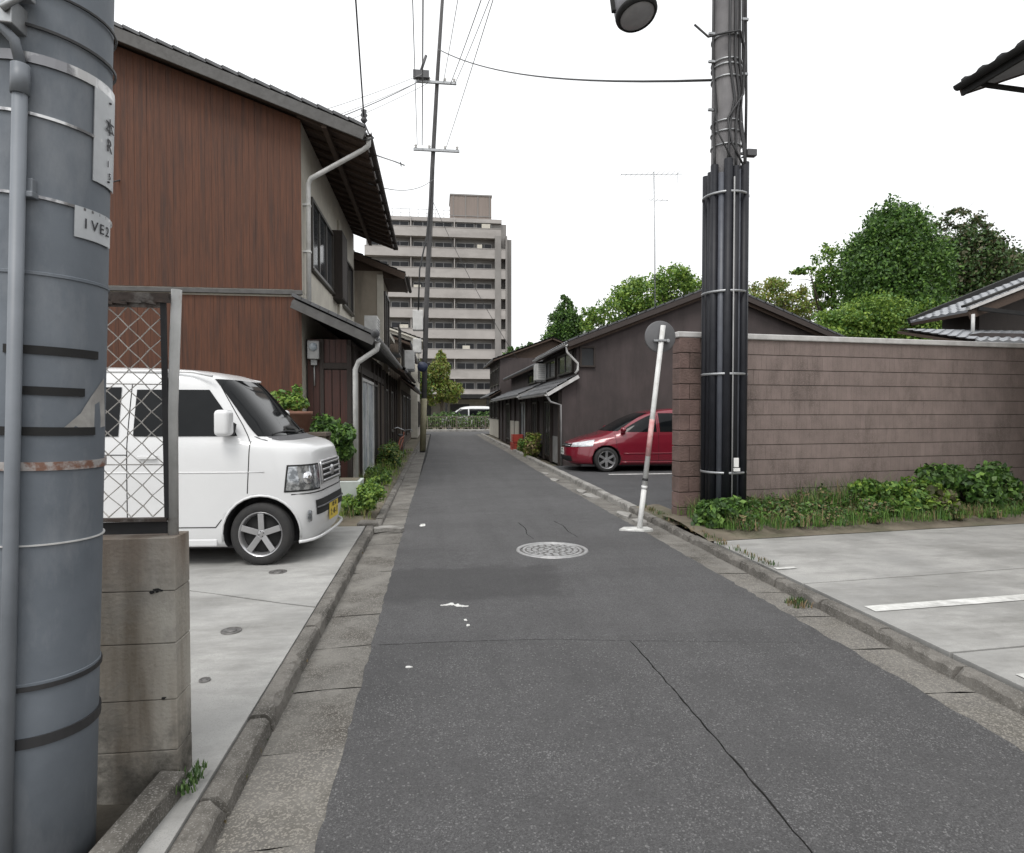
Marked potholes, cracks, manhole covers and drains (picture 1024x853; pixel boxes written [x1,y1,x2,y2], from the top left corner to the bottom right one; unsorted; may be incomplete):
crack [391,640,812,853]
manhole cover [516,542,588,559]
